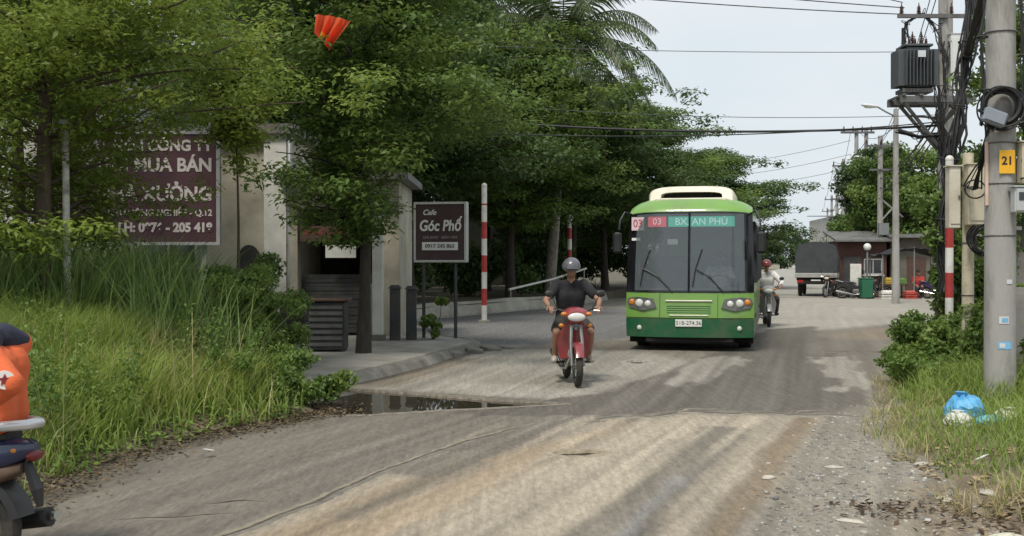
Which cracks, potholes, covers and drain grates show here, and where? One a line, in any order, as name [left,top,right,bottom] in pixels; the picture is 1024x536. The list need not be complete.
pothole [309,389,571,417]
